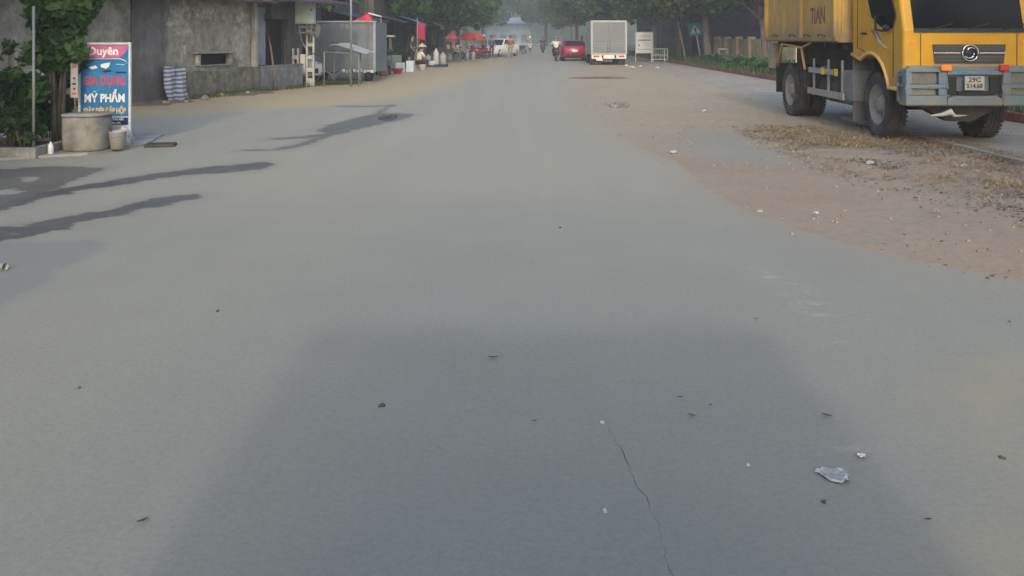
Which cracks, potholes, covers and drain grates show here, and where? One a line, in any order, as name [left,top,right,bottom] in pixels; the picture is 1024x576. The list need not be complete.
crack [598,408,673,575]
